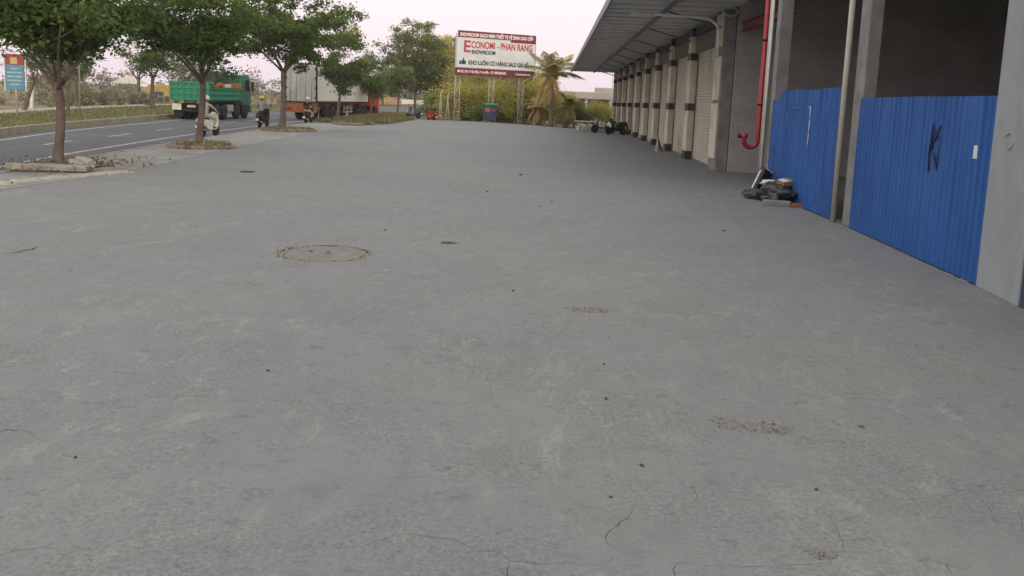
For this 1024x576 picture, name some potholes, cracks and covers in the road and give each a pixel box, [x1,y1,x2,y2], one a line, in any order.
pothole [804,546,839,560]
manhole cover [273,245,373,262]
pothole [742,419,793,436]
pothole [561,305,619,313]
crack [288,507,661,576]
pothole [706,414,745,431]
